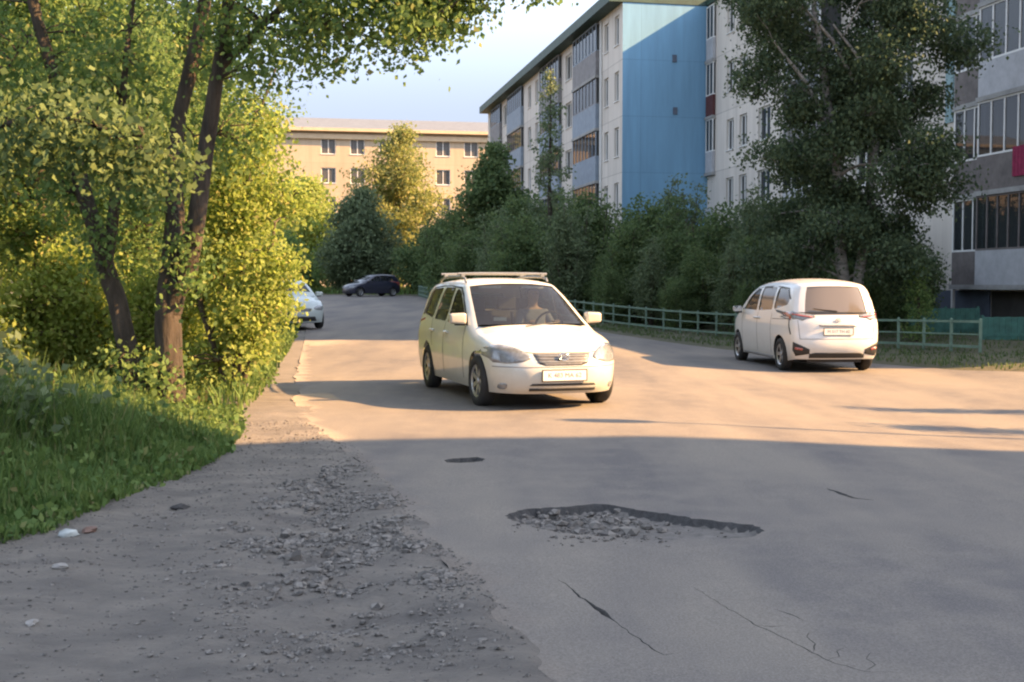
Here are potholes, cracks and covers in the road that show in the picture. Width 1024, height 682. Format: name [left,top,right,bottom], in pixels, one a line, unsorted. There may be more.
pothole [505,504,764,547]
crack [694,587,899,673]
crack [558,579,675,655]
crack [828,489,870,500]
